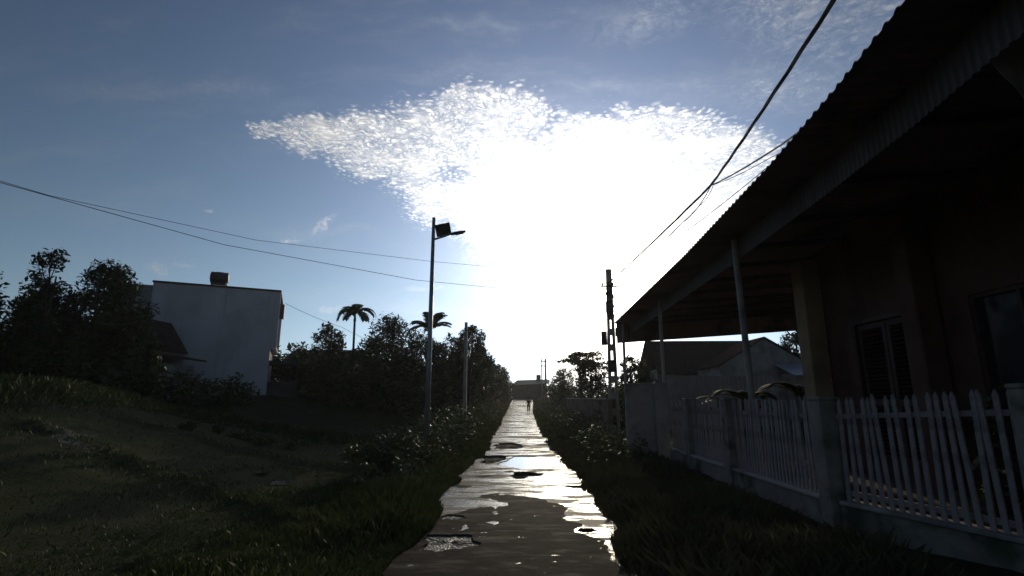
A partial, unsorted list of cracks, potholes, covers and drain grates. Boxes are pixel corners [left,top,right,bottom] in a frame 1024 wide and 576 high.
pothole [480,455,509,464]
pothole [422,534,481,552]
